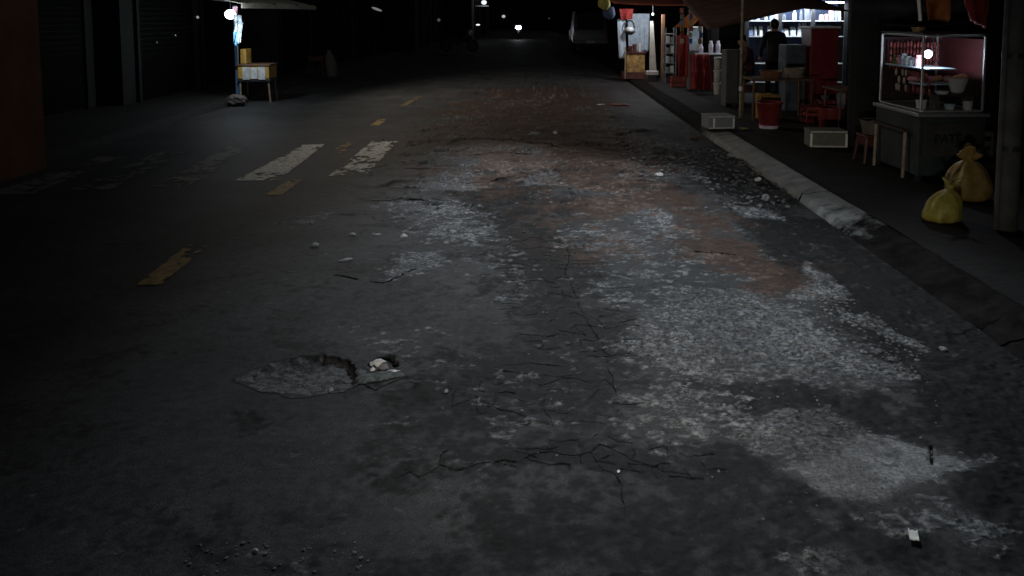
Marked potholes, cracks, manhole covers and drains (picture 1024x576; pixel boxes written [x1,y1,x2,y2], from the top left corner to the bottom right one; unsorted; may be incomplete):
crack [400,435,728,509]
pothole [233,351,404,398]
crack [334,268,416,284]
crack [451,233,646,425]
crack [935,318,999,337]
